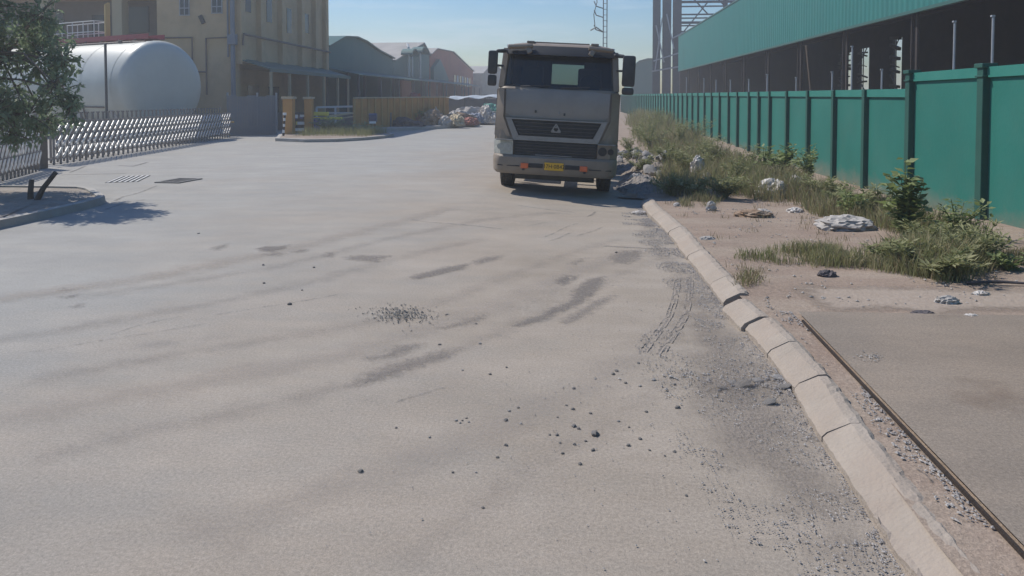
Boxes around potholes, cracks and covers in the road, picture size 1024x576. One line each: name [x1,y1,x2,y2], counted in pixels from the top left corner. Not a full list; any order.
drain grate [105,175,151,183]
